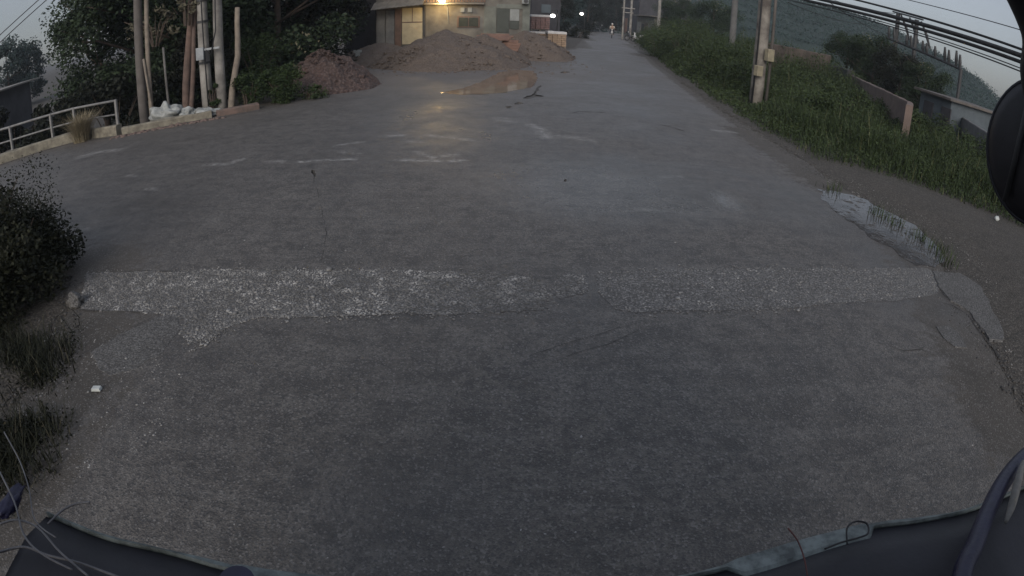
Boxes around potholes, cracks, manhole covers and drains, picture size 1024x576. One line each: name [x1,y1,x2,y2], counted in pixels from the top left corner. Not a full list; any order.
crack [934,276,1013,376]
